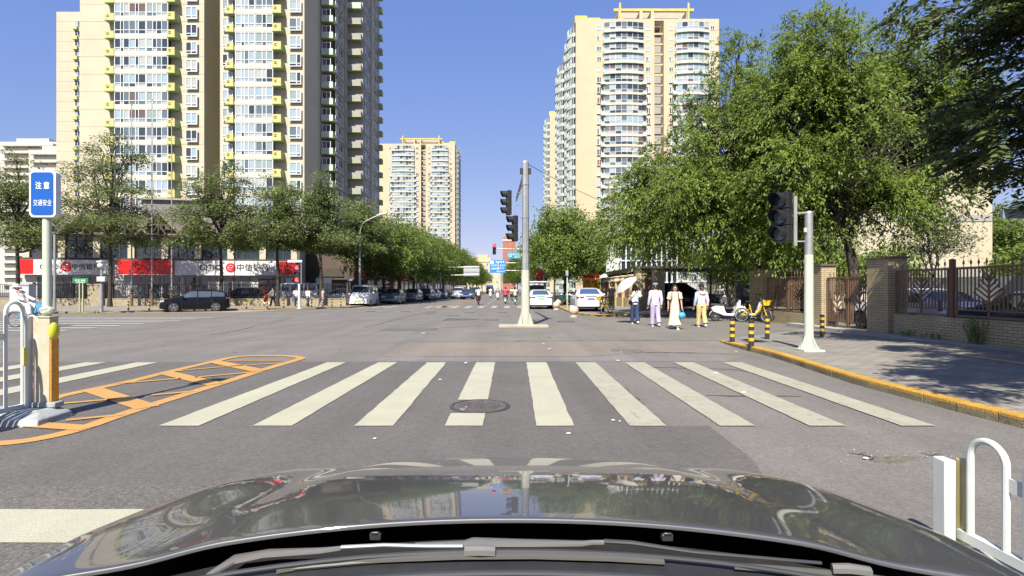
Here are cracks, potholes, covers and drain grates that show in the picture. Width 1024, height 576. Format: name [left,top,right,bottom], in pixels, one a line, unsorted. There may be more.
manhole cover [450,399,510,413]
